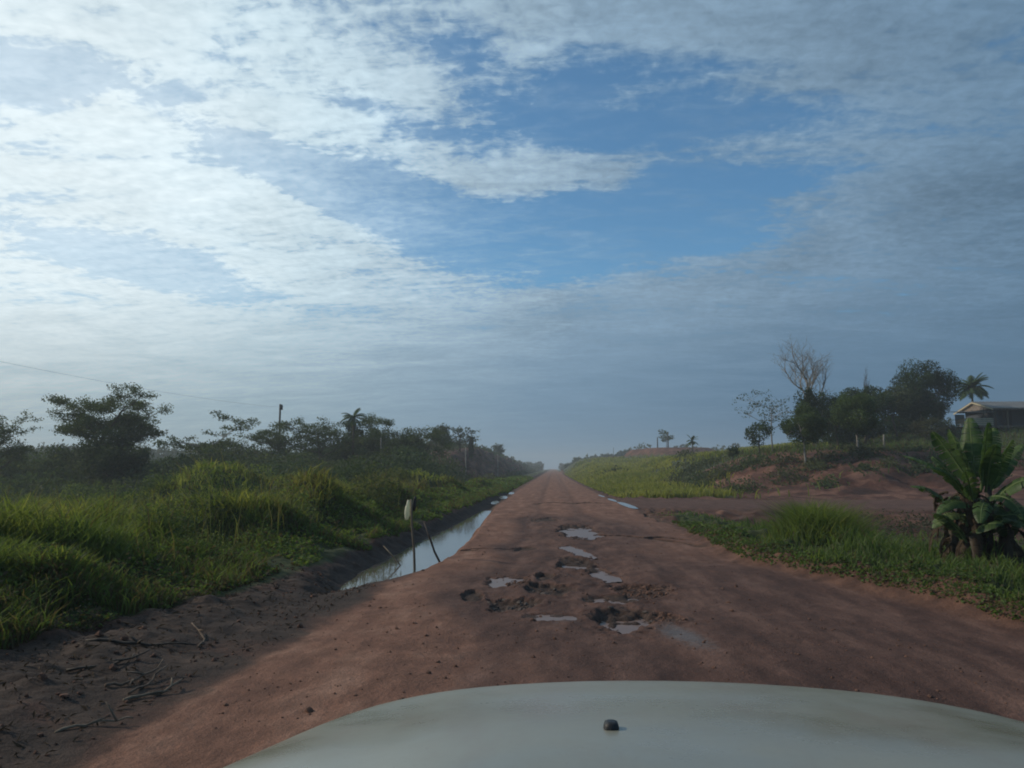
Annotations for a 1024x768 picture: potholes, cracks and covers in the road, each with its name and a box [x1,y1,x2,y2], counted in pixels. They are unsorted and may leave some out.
pothole [519,581,579,596]
pothole [485,596,553,613]
pothole [552,523,607,541]
pothole [459,589,486,602]
pothole [586,565,623,584]
pothole [585,605,657,636]
pothole [558,544,597,560]
pothole [471,575,532,588]
crack [595,514,709,547]
pothole [521,613,586,621]
